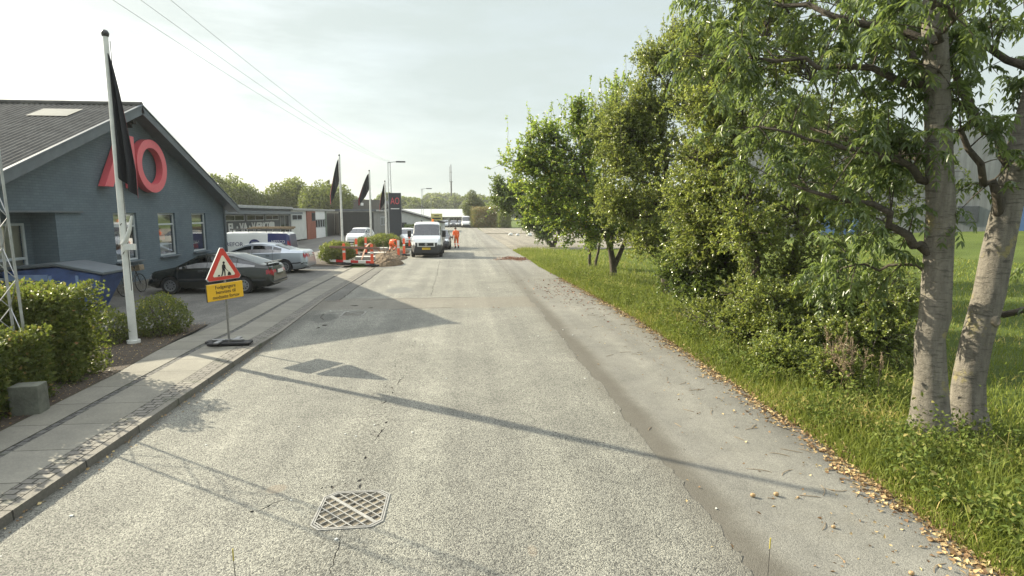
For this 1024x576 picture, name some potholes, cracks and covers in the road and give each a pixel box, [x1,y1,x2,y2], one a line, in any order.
drain grate [310,490,390,531]
